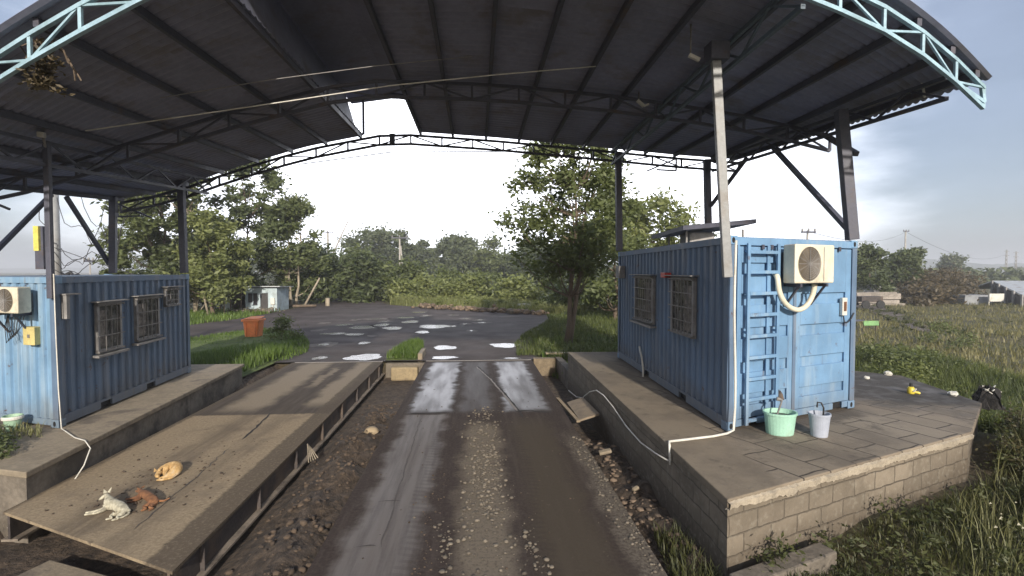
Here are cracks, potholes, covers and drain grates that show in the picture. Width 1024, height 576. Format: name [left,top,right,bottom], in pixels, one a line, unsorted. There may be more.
crack [477,366,545,418]
